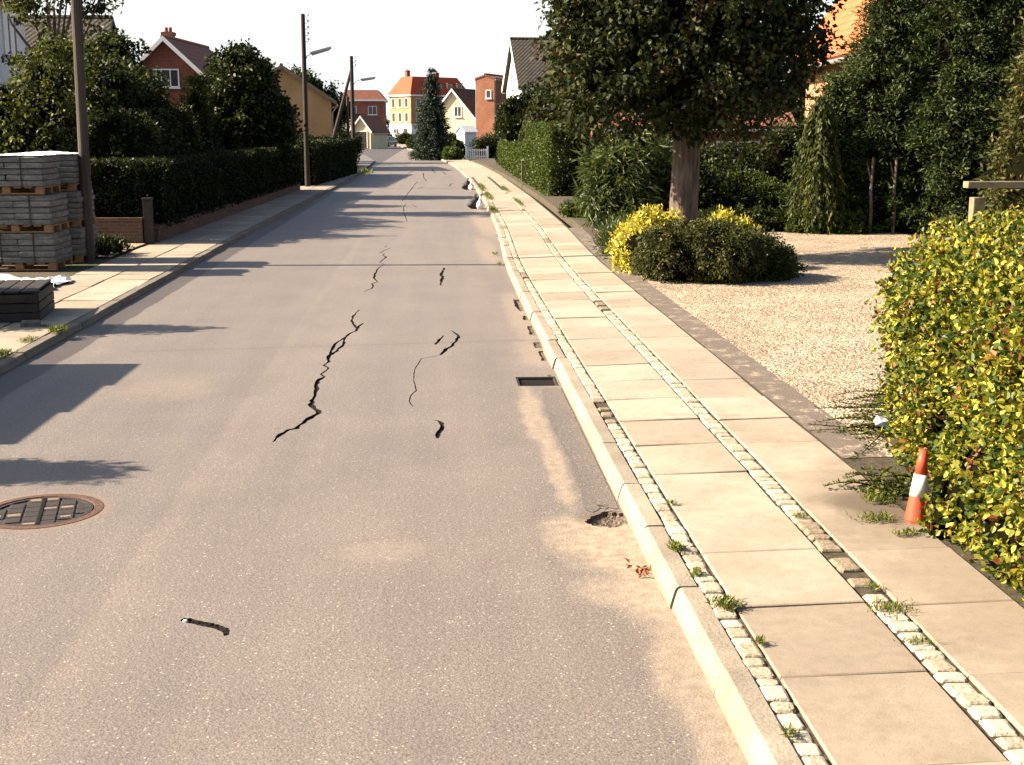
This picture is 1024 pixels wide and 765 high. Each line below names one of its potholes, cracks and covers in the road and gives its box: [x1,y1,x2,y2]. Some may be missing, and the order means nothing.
pothole [584,512,628,528]
drain grate [516,377,559,386]
manhole cover [0,494,104,530]
crack [364,246,387,292]
crack [181,618,230,636]
crack [273,310,364,442]
crack [409,330,460,406]
crack [434,420,445,438]
